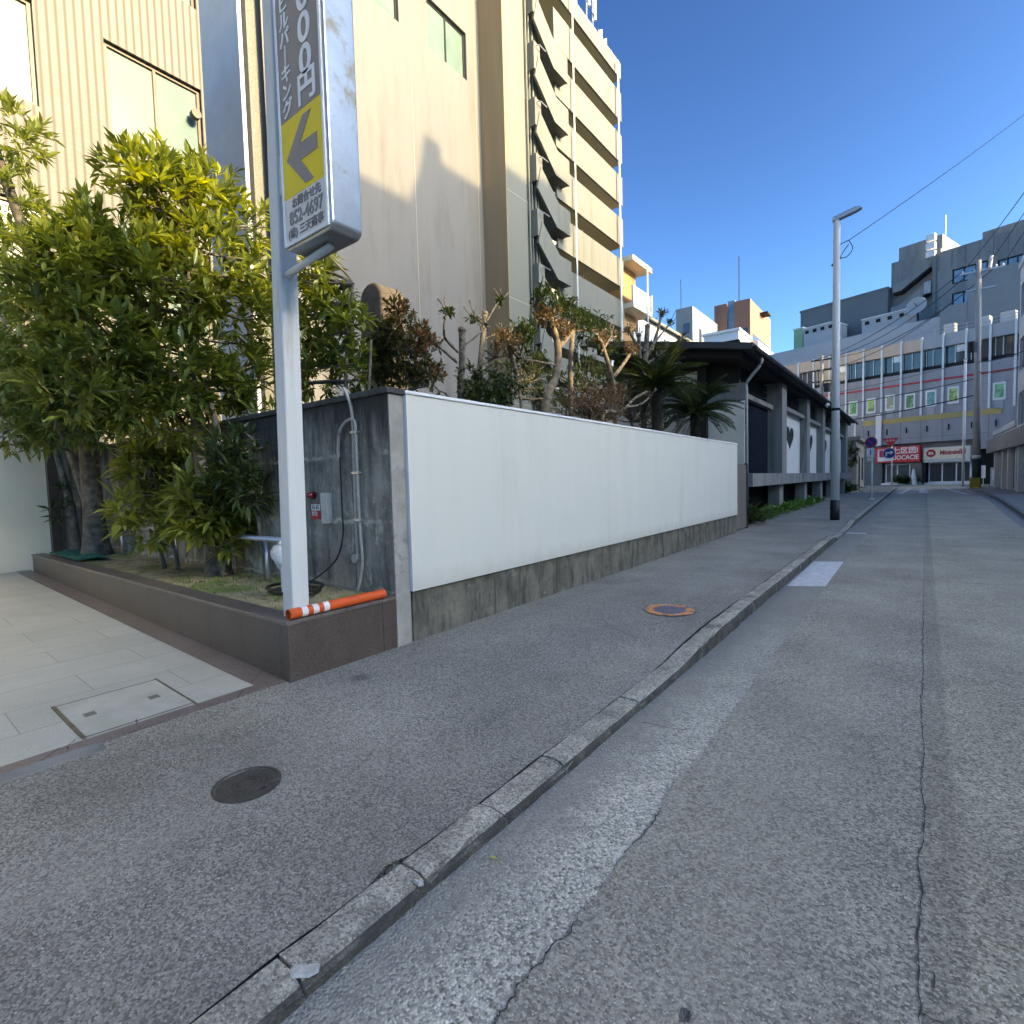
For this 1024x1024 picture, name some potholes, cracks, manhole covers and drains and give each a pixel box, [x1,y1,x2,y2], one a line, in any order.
crack [916,555,943,1024]
manhole cover [211,766,281,804]
crack [494,809,662,1024]
utility cover [51,678,200,740]
